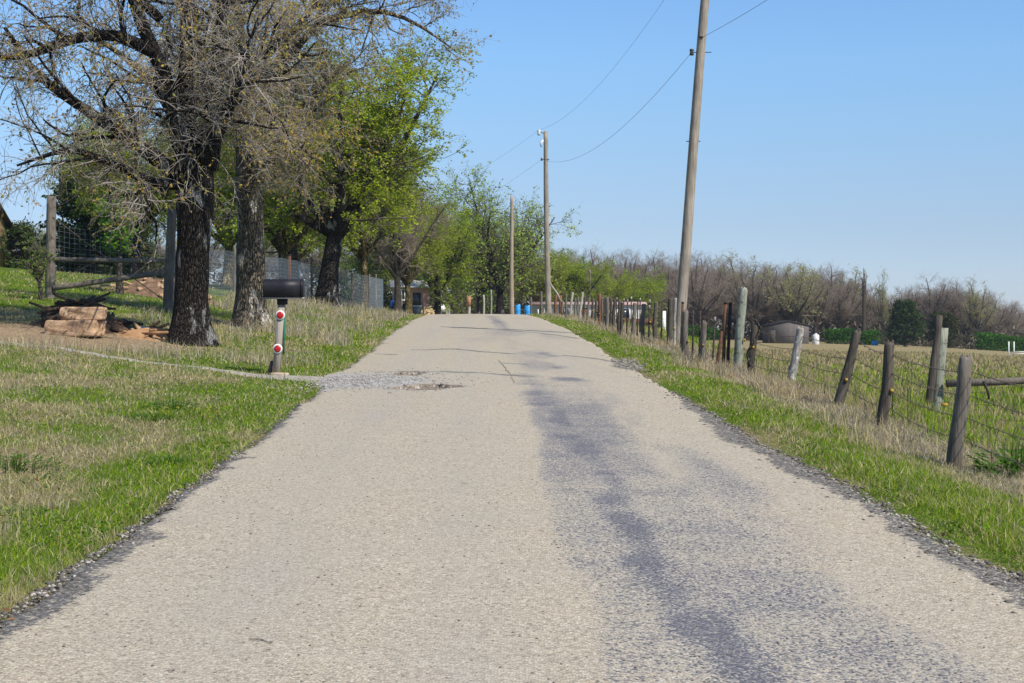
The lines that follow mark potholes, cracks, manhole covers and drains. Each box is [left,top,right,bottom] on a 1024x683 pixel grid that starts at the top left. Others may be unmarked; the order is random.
crack [381,343,535,382]
pothole [382,383,472,392]
